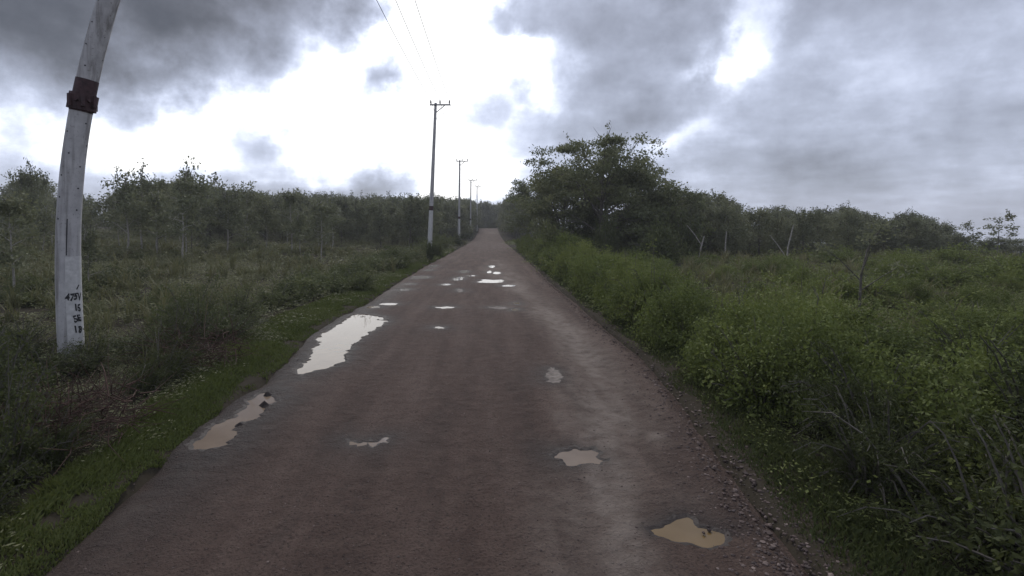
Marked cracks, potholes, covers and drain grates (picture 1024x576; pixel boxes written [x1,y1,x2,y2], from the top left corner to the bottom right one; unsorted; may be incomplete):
pothole [345,436,393,449]
pothole [545,367,564,383]
pothole [184,391,282,452]
pothole [549,444,610,468]
pothole [644,513,732,550]
pothole [291,313,391,376]
